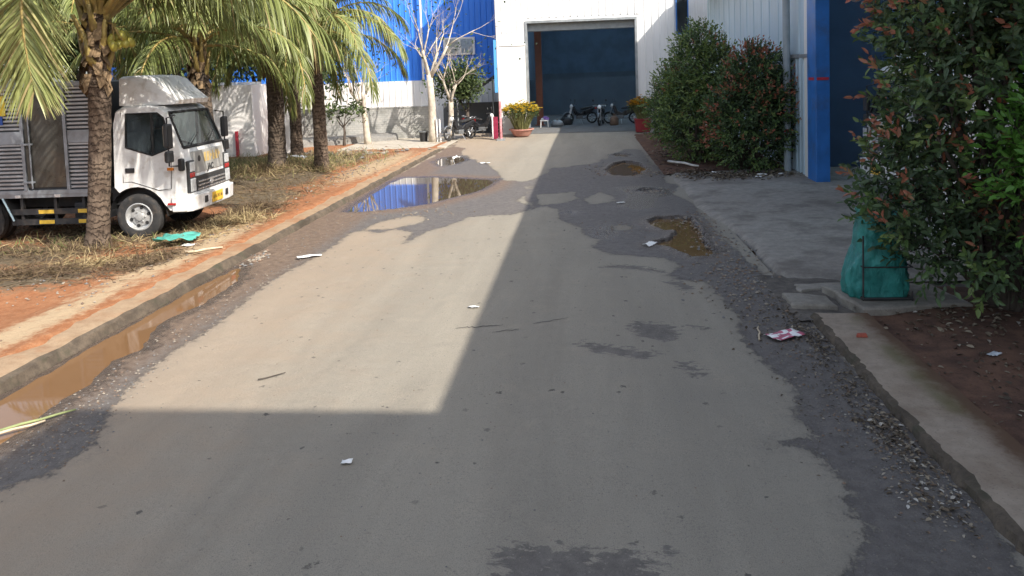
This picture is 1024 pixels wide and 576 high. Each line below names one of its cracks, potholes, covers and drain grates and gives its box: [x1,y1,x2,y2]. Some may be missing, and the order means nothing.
pothole [630,213,742,263]
pothole [593,160,659,178]
pothole [622,186,678,196]
